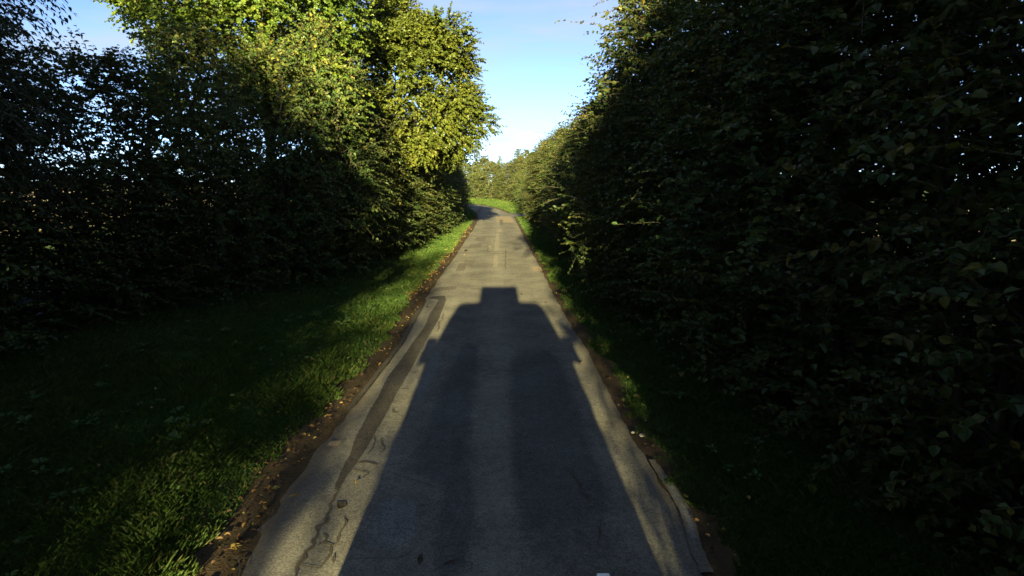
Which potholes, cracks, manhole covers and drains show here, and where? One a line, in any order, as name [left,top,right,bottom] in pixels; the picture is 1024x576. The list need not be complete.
crack [353,435,385,478]
crack [294,487,347,576]
